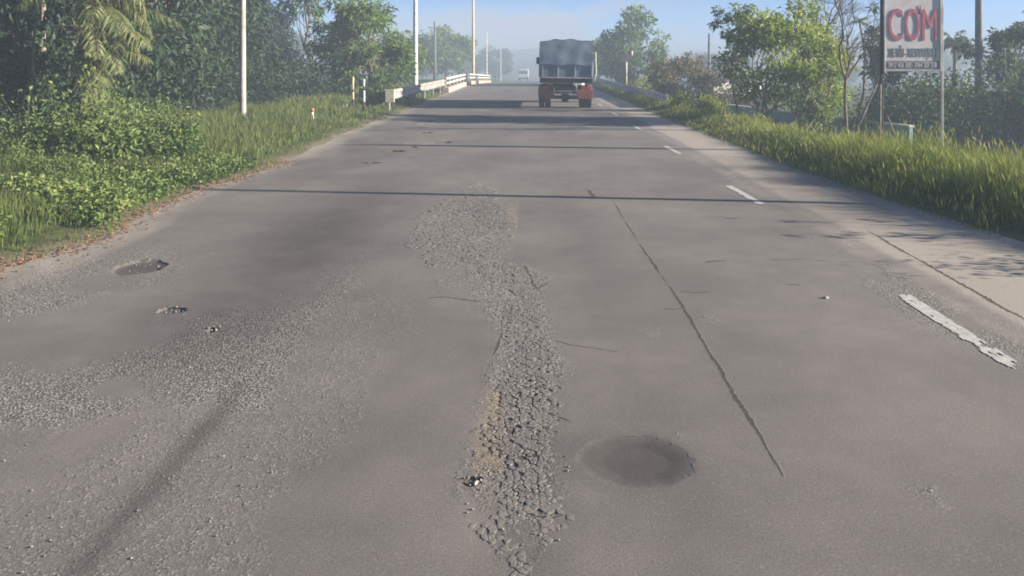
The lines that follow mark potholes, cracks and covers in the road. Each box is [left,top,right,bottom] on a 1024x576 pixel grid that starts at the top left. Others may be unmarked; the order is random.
crack [613,200,802,476]
pothole [100,257,180,279]
crack [404,182,619,576]
pothole [143,304,201,318]
